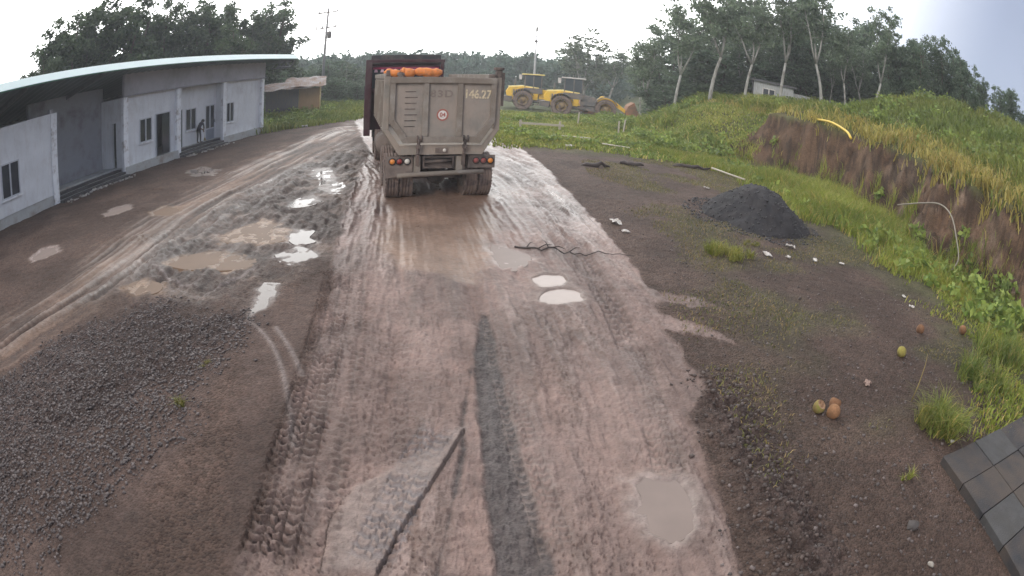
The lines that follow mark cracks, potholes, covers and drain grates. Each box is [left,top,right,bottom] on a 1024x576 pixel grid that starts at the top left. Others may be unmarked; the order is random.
pothole [28,244,65,264]
pothole [625,471,703,551]
pothole [532,285,590,306]
pothole [101,203,135,218]
pothole [527,271,573,288]
